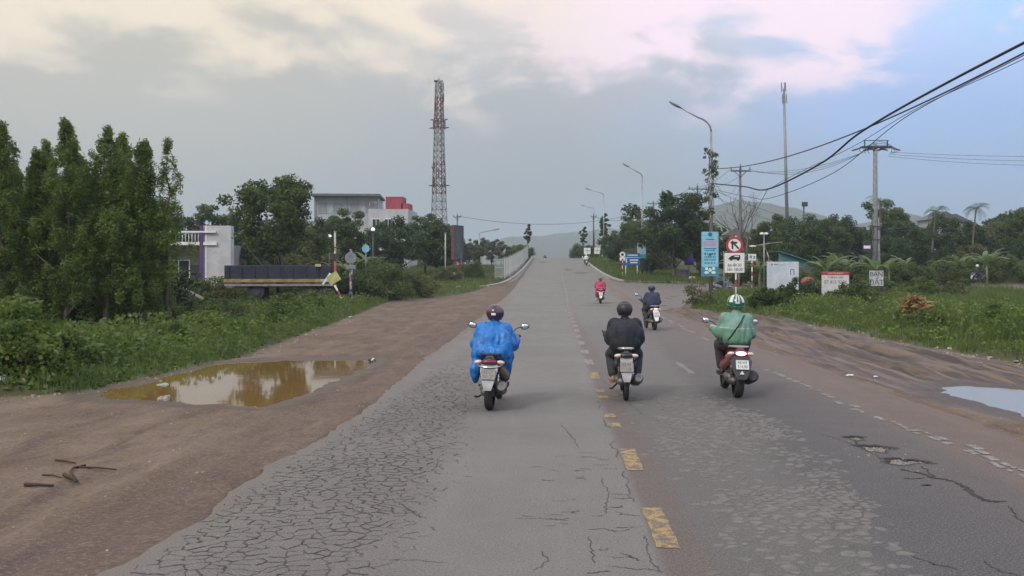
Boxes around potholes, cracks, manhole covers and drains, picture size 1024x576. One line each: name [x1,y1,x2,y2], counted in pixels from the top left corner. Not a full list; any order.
crack [130,477,470,576]
crack [901,465,1024,522]
pothole [880,457,938,466]
crack [560,424,662,573]
pothole [849,444,899,453]
